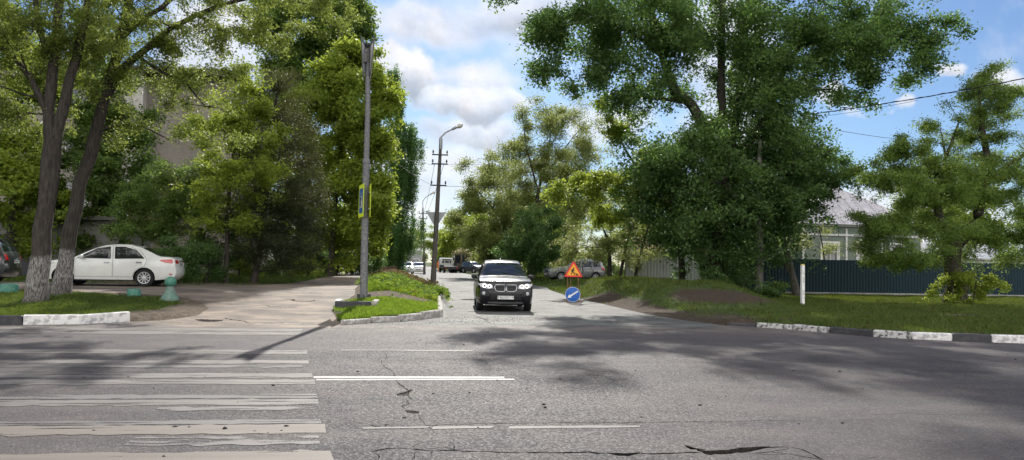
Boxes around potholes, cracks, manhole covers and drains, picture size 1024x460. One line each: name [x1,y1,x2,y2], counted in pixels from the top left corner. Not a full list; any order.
crack [372,356,824,460]
